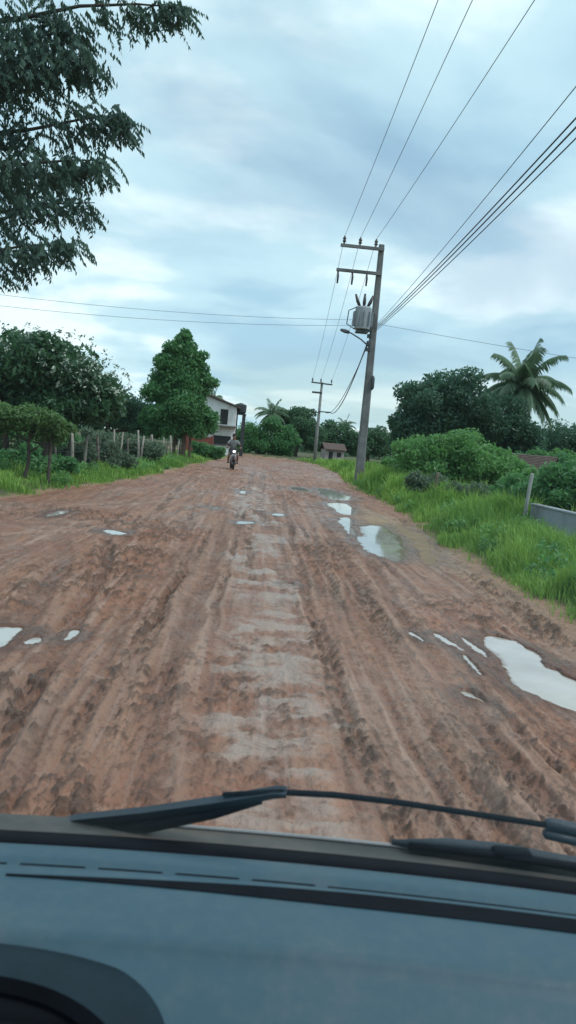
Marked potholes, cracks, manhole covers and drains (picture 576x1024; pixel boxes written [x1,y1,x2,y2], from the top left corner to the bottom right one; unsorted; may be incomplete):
pothole [350,524,416,561]
pothole [62,628,82,640]
pothole [428,630,469,651]
pothole [479,633,576,711]
pothole [460,651,486,676]
pothole [326,502,356,515]
pothole [460,635,494,659]
pothole [336,517,358,535]
pothole [18,633,47,644]
pothole [0,623,28,648]
